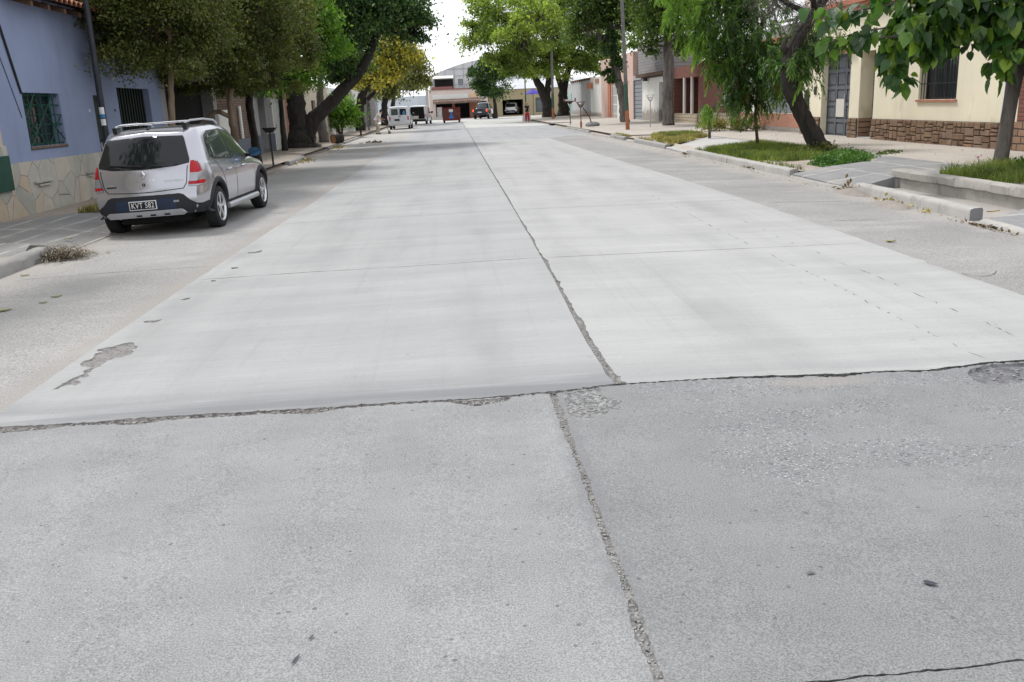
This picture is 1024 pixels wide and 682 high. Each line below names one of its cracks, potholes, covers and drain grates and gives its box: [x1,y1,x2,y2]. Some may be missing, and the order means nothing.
crack [807,659,1024,682]
pothole [53,342,138,390]
